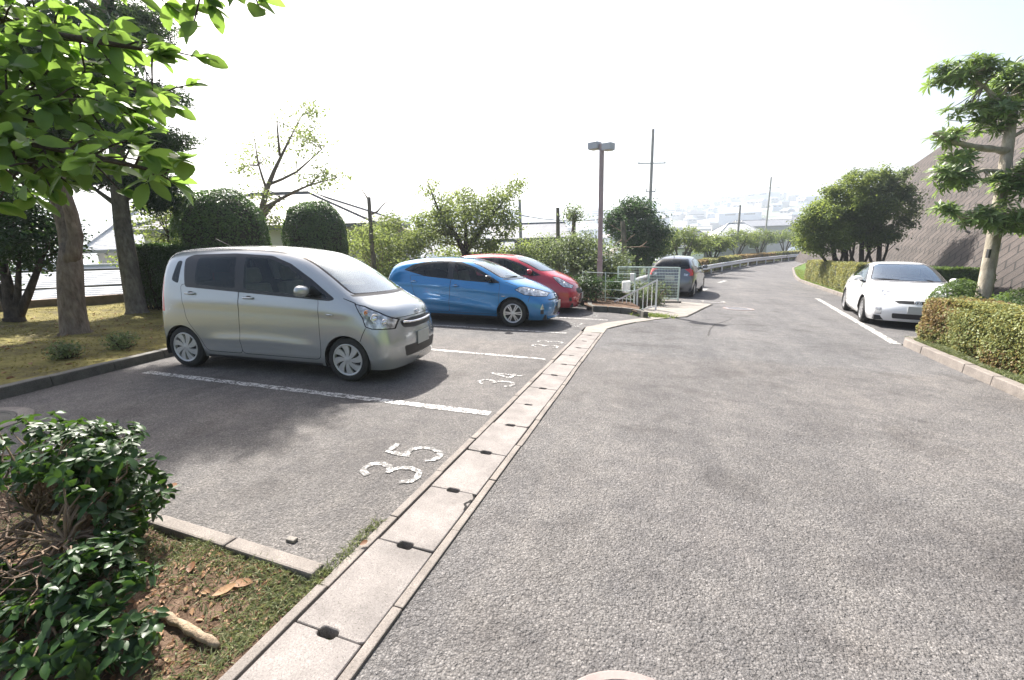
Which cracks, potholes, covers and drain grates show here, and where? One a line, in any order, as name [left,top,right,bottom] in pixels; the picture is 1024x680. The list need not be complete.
crack [686,304,766,336]
manhole cover [578,670,655,680]
manhole cover [0,407,35,428]
